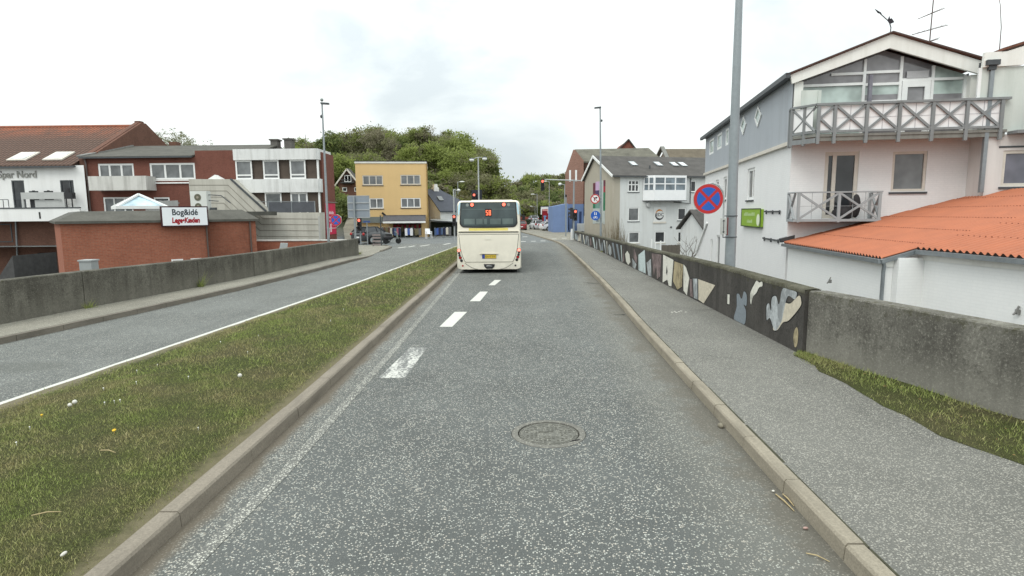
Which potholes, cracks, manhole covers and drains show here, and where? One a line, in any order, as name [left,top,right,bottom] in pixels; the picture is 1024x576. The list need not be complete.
manhole cover [511,420,586,448]
